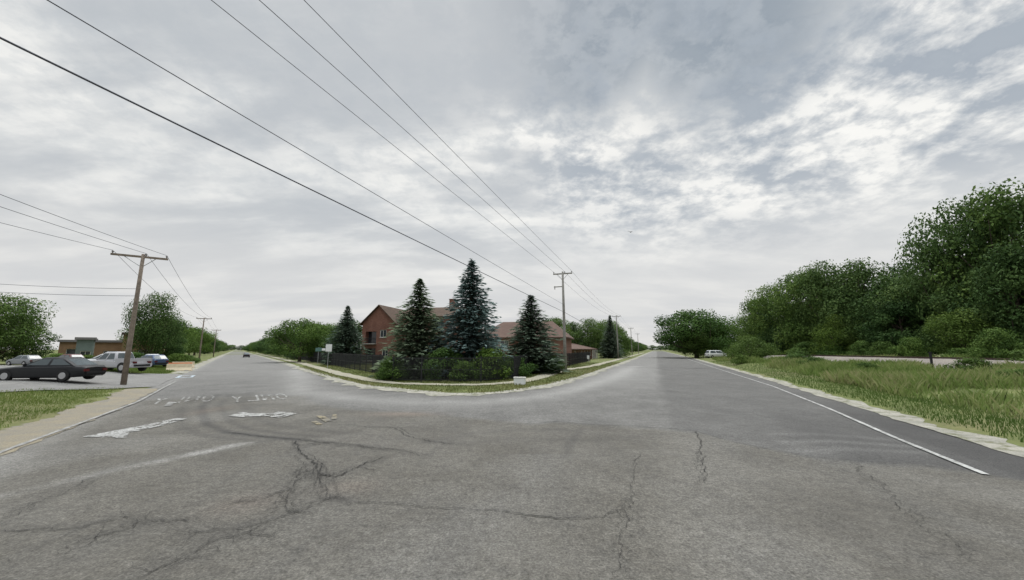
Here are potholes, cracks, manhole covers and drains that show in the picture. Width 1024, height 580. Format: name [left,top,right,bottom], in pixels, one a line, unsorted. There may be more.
crack [1,477,200,555]
crack [131,424,648,579]
crack [694,431,711,484]
crack [845,465,1008,559]
